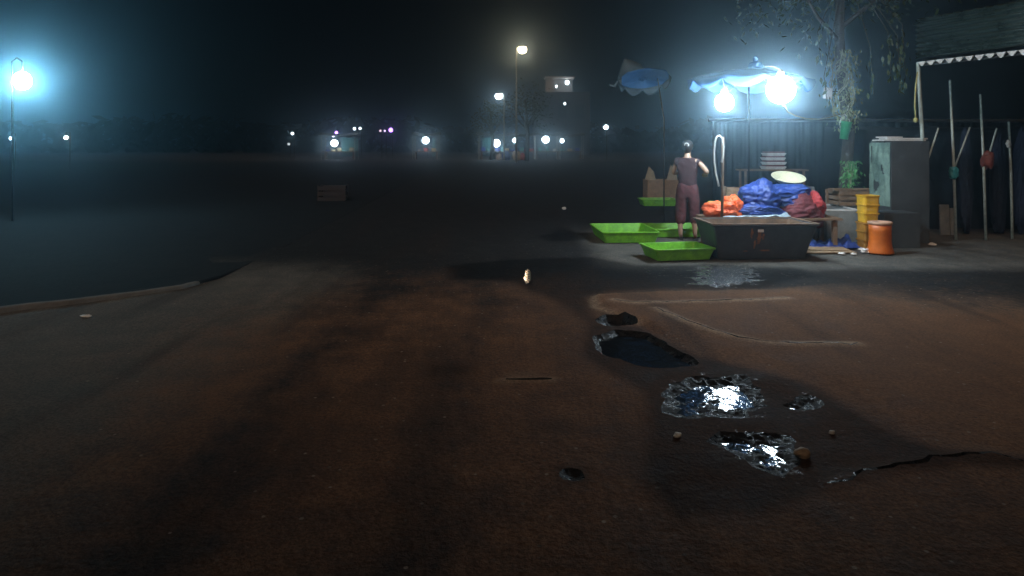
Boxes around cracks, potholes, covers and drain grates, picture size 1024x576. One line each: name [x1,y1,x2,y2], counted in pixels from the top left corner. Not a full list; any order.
pothole [595,312,638,326]
pothole [706,431,802,477]
crack [827,451,1023,483]
pothole [661,374,768,419]
pothole [559,468,585,481]
pothole [783,395,825,410]
pothole [592,329,699,368]
